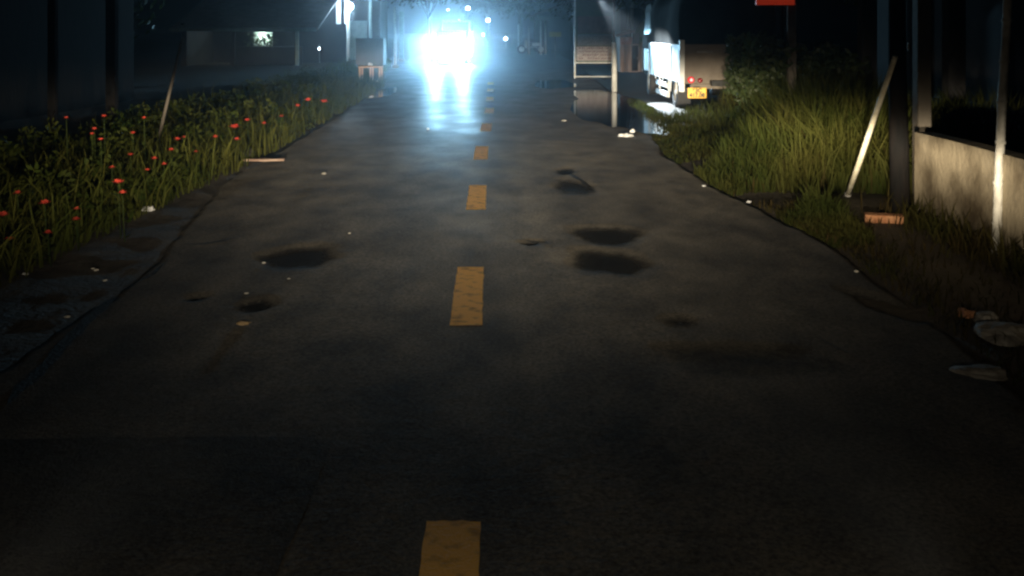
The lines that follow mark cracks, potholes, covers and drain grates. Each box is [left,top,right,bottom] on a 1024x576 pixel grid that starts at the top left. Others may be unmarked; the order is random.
pothole [261,248,332,268]
pothole [557,181,593,194]
pothole [575,228,639,245]
pothole [241,300,270,312]
pothole [576,252,645,275]
